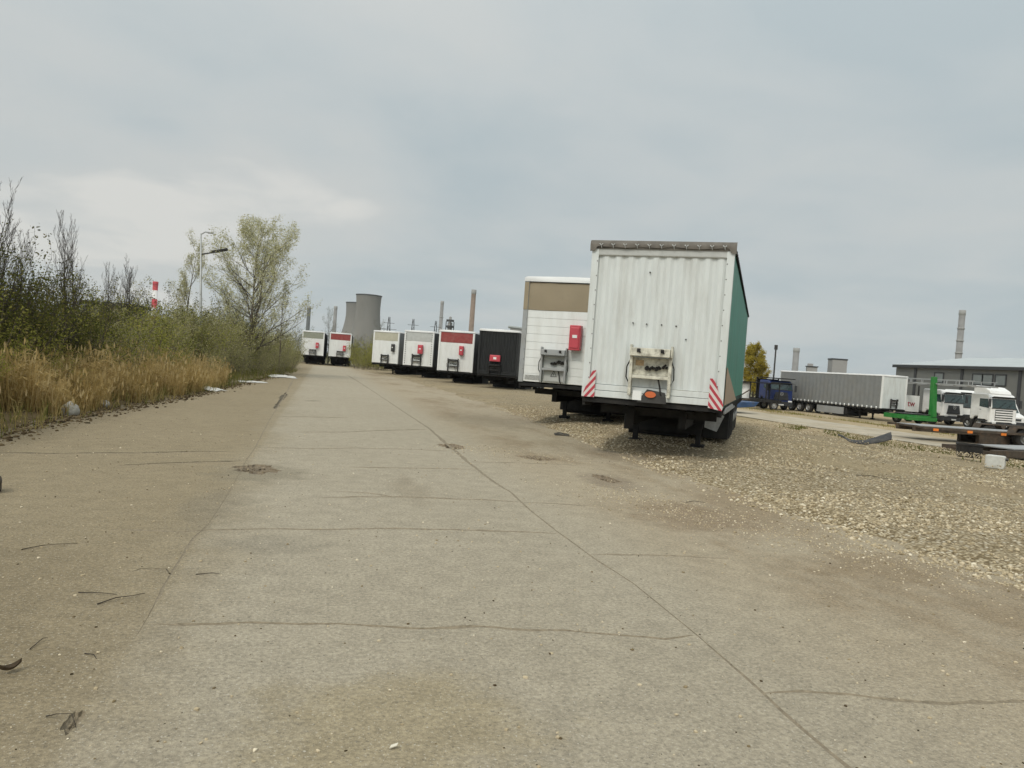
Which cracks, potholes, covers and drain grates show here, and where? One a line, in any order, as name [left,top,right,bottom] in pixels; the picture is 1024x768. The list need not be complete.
pothole [233,464,282,475]
pothole [592,474,621,483]
crack [767,690,1024,705]
crack [150,621,693,640]
